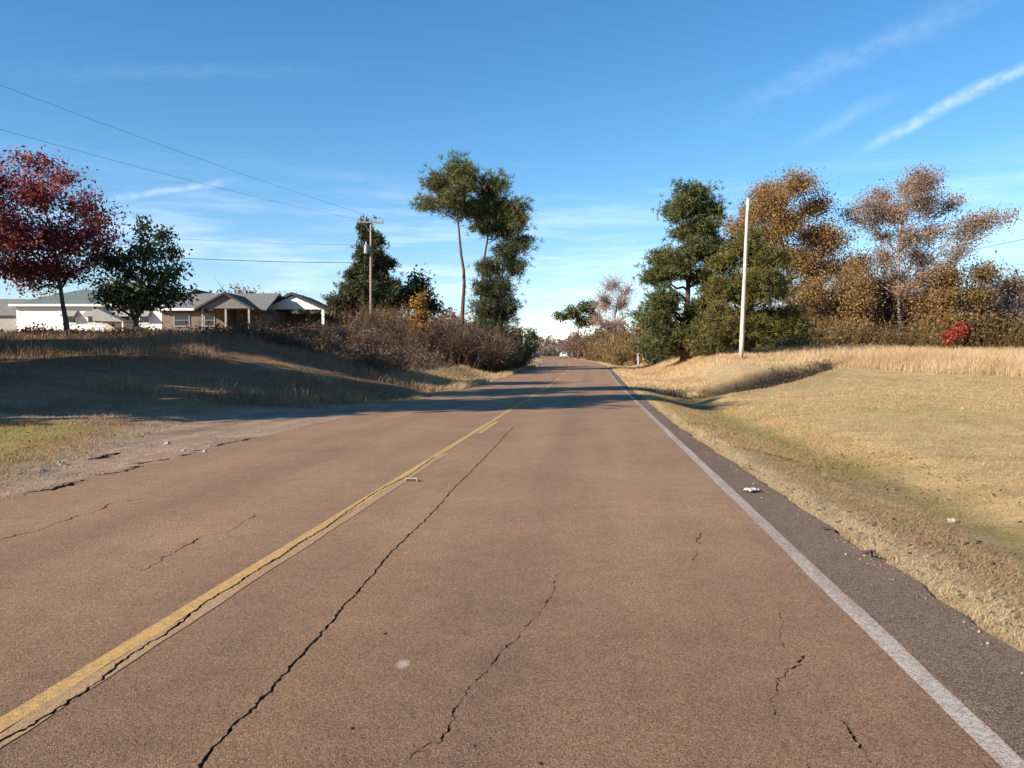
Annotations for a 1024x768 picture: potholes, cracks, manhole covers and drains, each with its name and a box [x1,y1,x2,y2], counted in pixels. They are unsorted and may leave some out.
crack [769,613,807,715]
crack [0,428,513,768]
crack [410,575,558,759]
crack [841,720,881,768]
